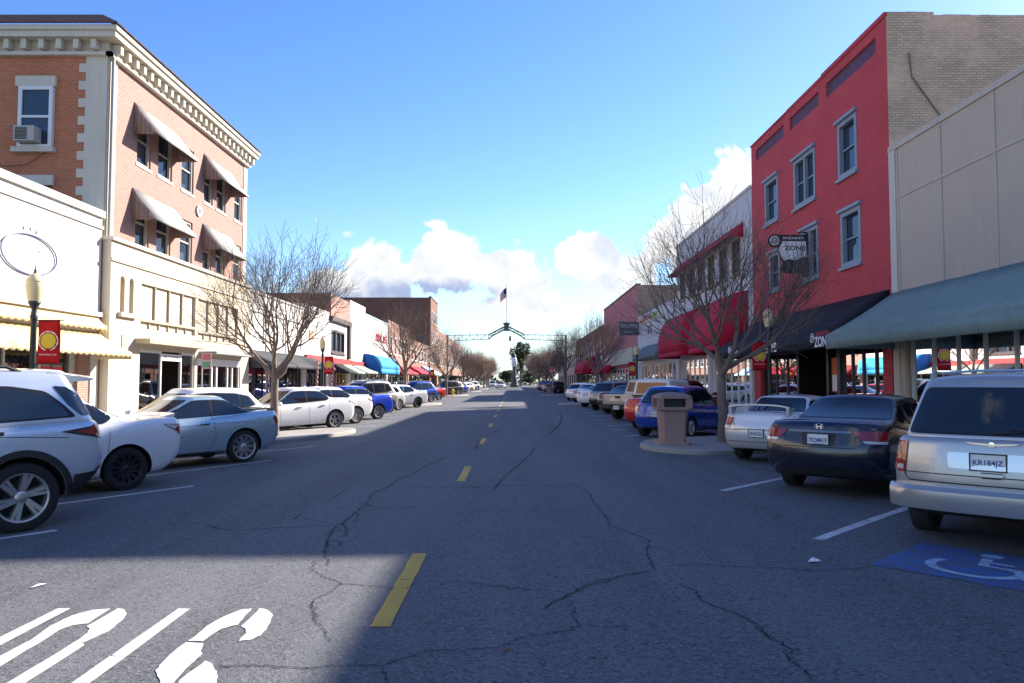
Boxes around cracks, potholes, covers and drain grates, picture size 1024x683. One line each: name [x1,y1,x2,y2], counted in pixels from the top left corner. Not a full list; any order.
crack [680,584,815,683]
crack [470,414,563,490]
crack [187,456,656,680]
